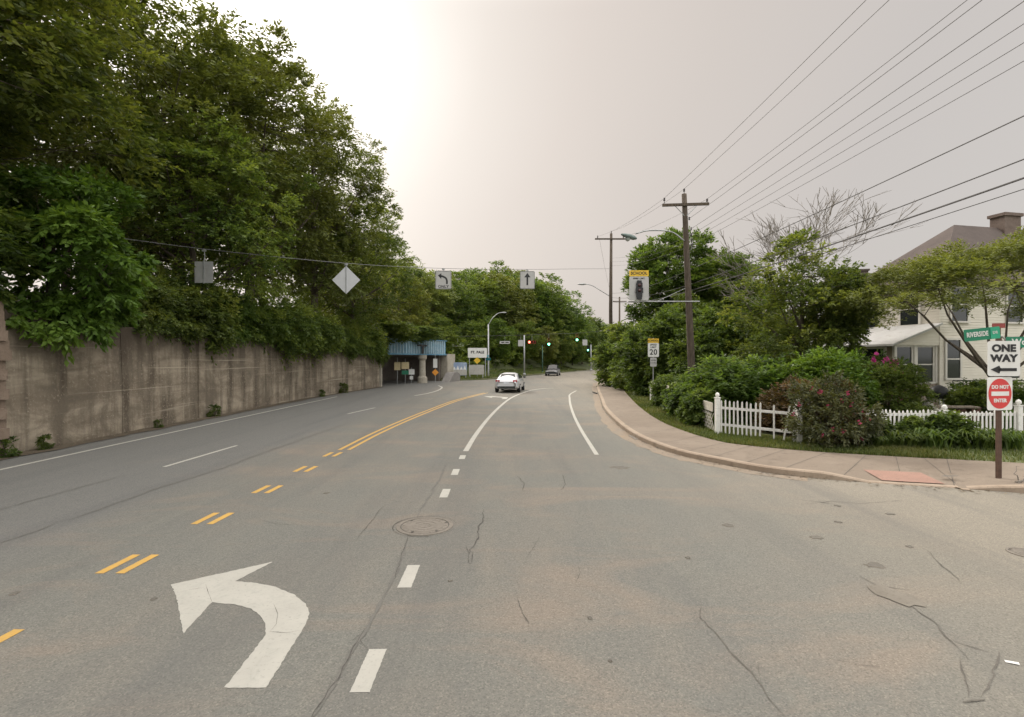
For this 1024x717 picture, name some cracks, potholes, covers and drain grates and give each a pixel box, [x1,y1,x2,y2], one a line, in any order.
manhole cover [1005,547,1024,557]
crack [693,608,786,717]
crack [356,500,450,577]
crack [860,576,1000,697]
crack [311,629,366,717]
manhole cover [396,517,453,536]
crack [465,509,484,565]
